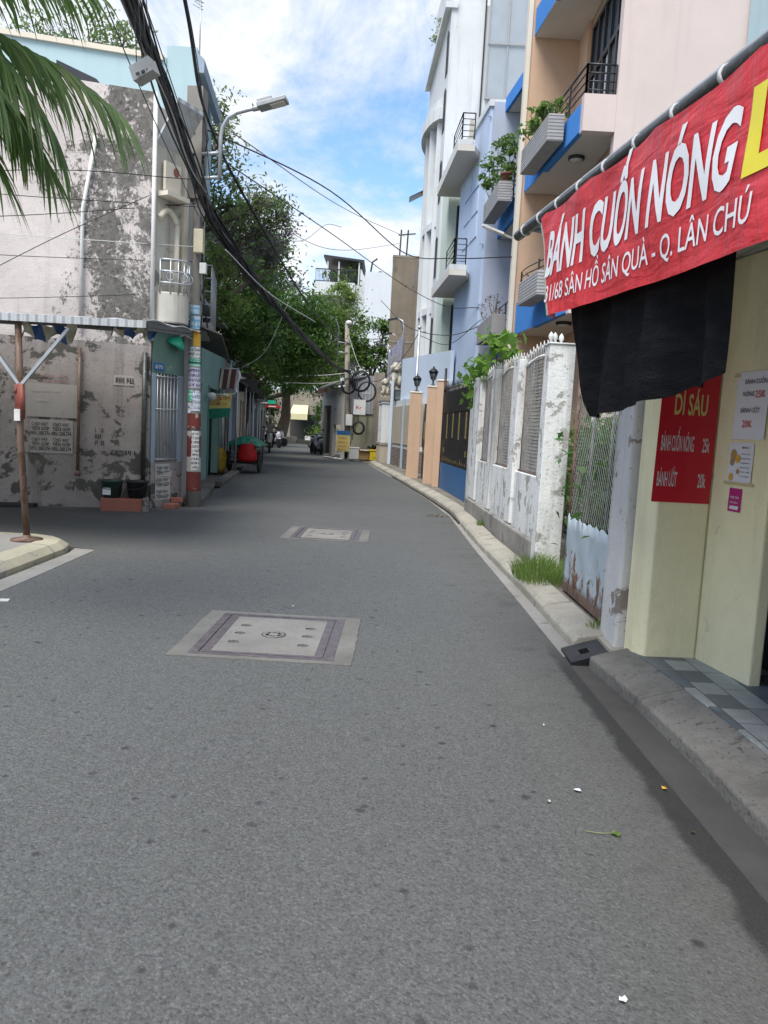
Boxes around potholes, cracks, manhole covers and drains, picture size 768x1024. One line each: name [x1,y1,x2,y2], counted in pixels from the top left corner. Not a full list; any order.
manhole cover [280,526,371,543]
manhole cover [165,610,361,666]
